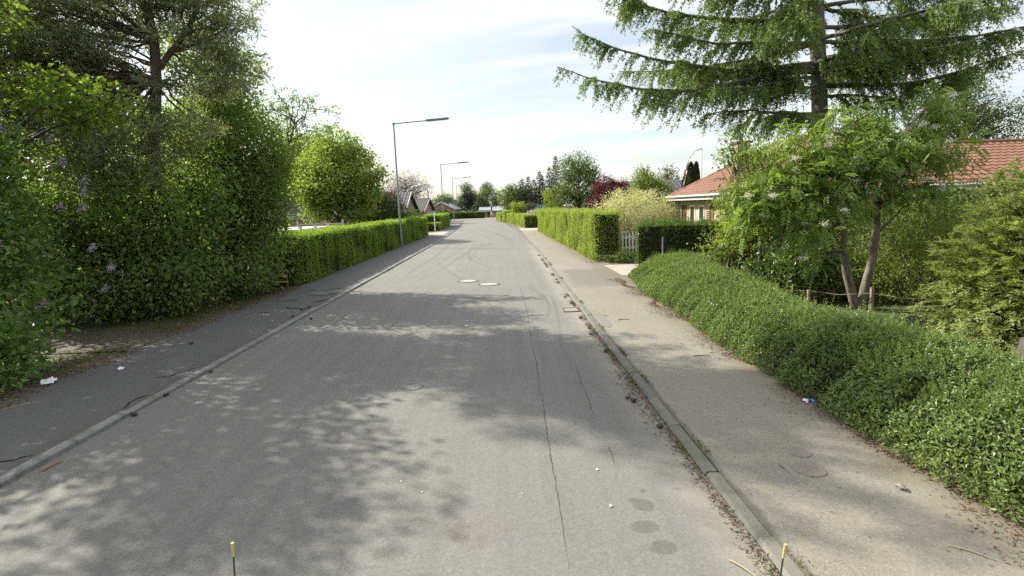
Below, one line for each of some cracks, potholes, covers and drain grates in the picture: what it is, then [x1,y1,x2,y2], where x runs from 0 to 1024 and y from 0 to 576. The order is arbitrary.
crack [521,290,569,573]
crack [265,288,344,313]
manhole cover [402,383,424,391]
